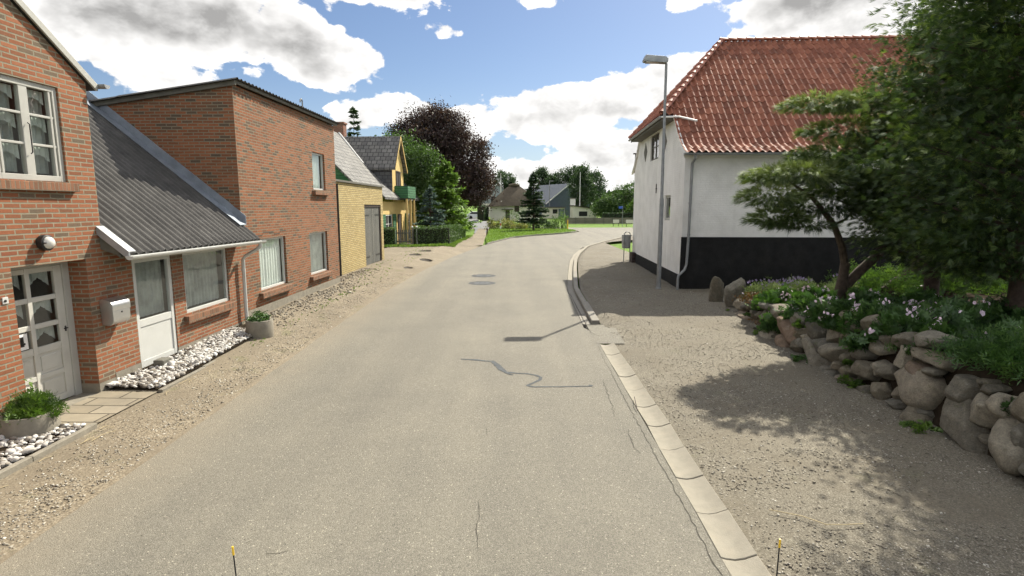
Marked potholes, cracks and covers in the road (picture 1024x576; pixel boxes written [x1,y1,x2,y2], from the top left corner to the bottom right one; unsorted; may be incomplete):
crack [598,346,723,576]
